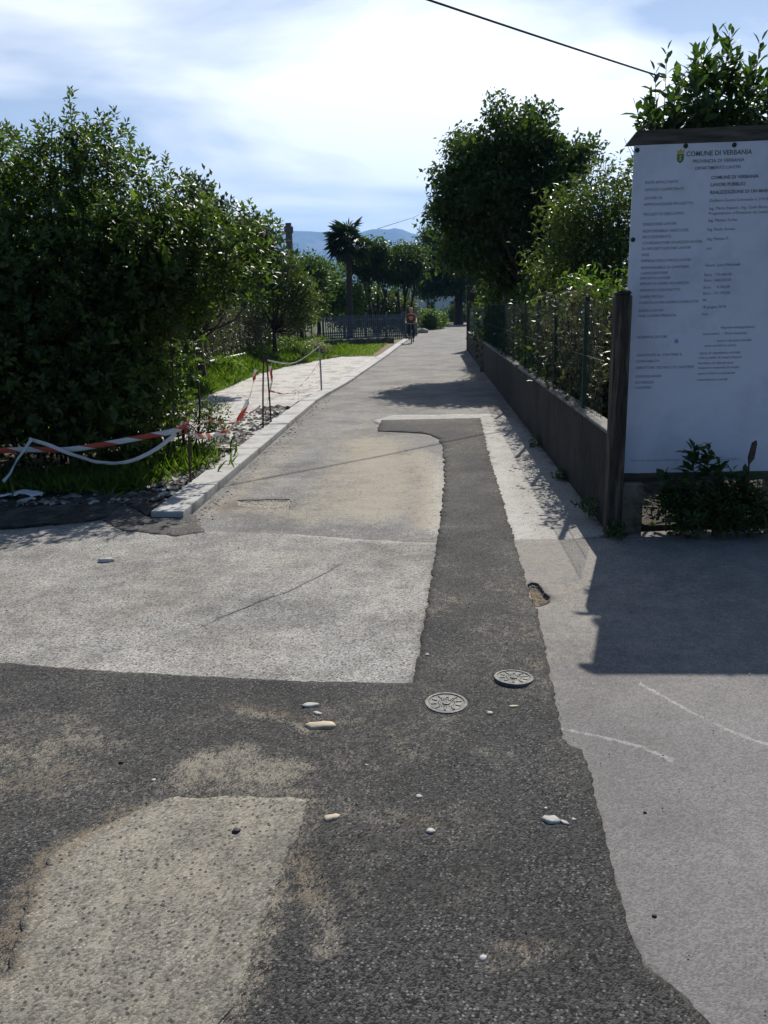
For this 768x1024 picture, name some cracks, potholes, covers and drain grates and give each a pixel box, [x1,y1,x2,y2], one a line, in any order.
manhole cover [491,669,536,688]
pothole [527,582,550,607]
manhole cover [423,692,470,714]
